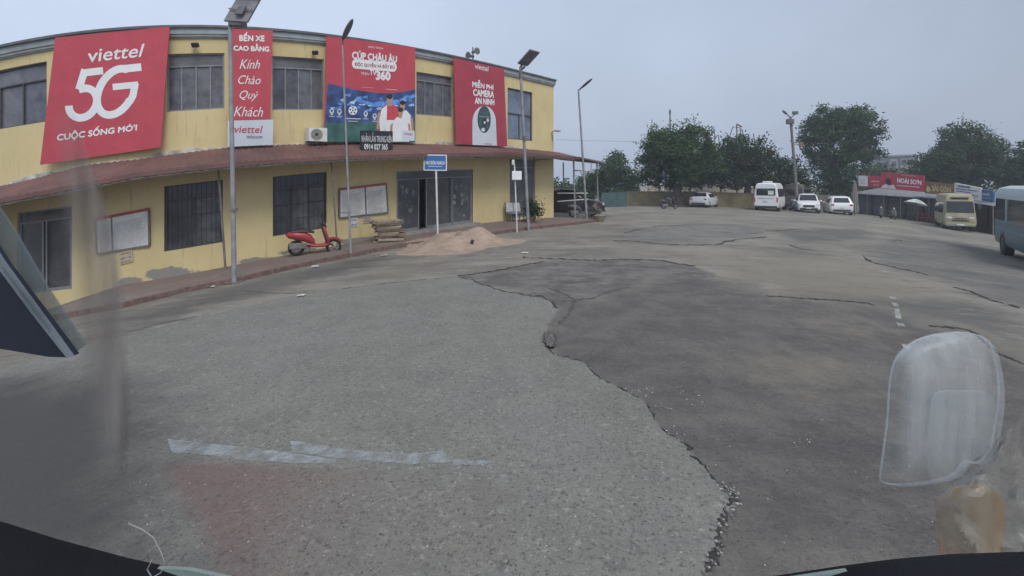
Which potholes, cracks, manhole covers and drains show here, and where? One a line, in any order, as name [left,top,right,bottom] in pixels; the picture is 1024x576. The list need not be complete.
crack [953,287,1020,308]
crack [458,224,815,572]
pothole [543,331,557,347]
crack [863,256,927,275]
crack [766,295,873,305]
